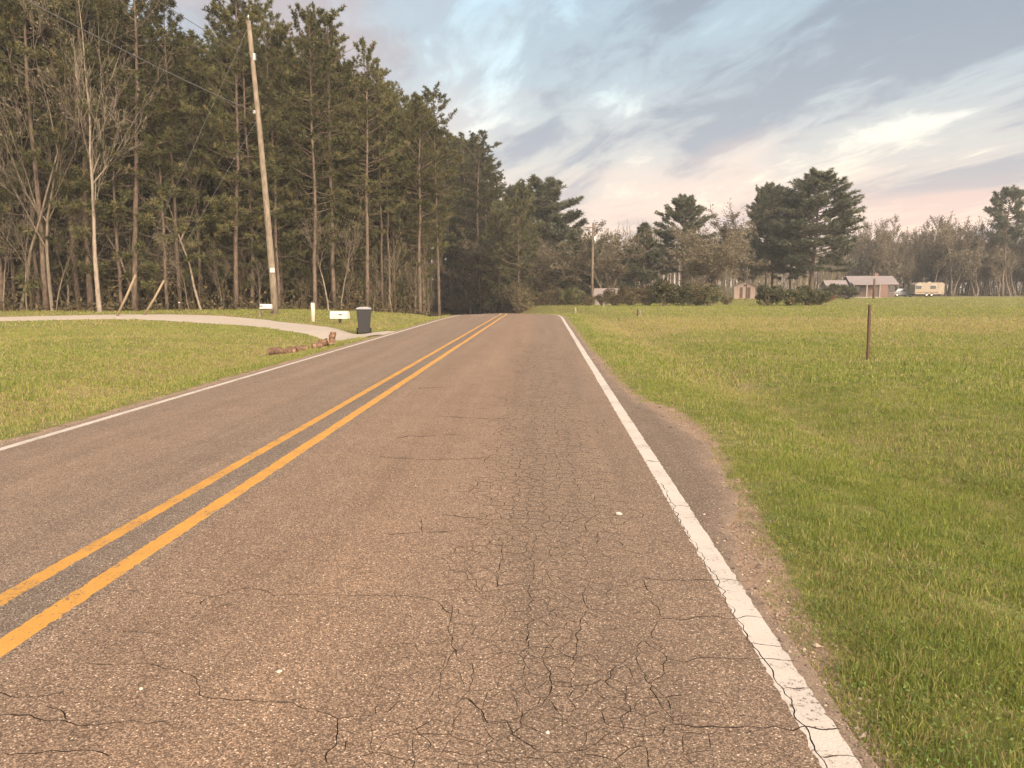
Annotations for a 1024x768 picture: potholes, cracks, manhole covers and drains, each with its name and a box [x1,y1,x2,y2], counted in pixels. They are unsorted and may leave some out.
crack [0,343,854,768]
